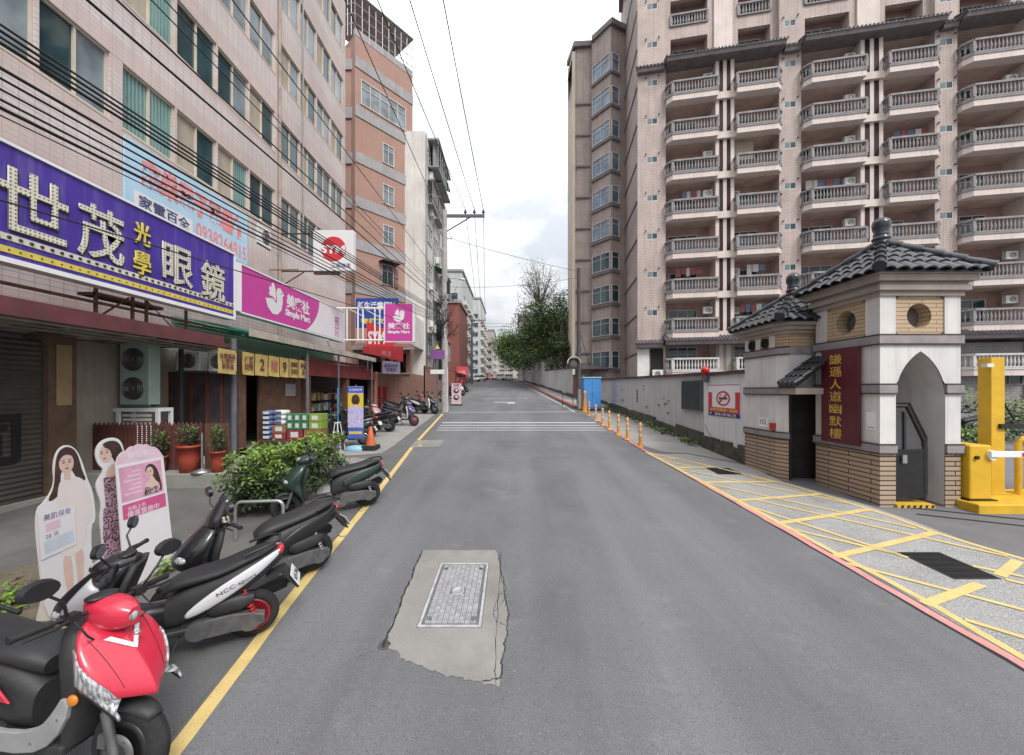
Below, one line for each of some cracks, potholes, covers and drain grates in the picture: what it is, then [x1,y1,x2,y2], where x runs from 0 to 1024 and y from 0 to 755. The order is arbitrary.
crack [483,554,510,684]
manhole cover [417,563,489,628]
